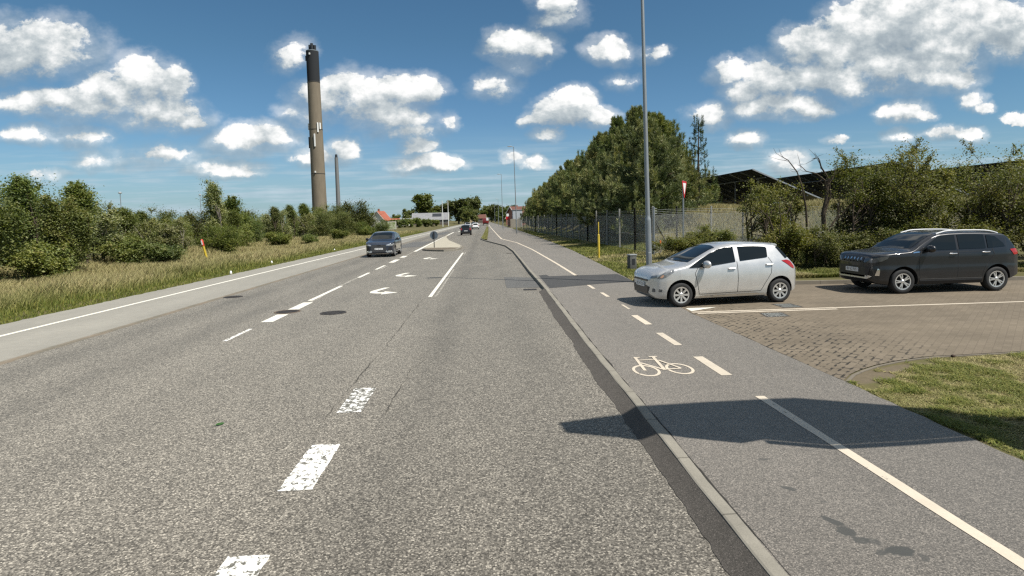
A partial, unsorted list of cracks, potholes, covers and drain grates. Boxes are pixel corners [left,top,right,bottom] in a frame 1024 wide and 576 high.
crack [315,299,423,433]
